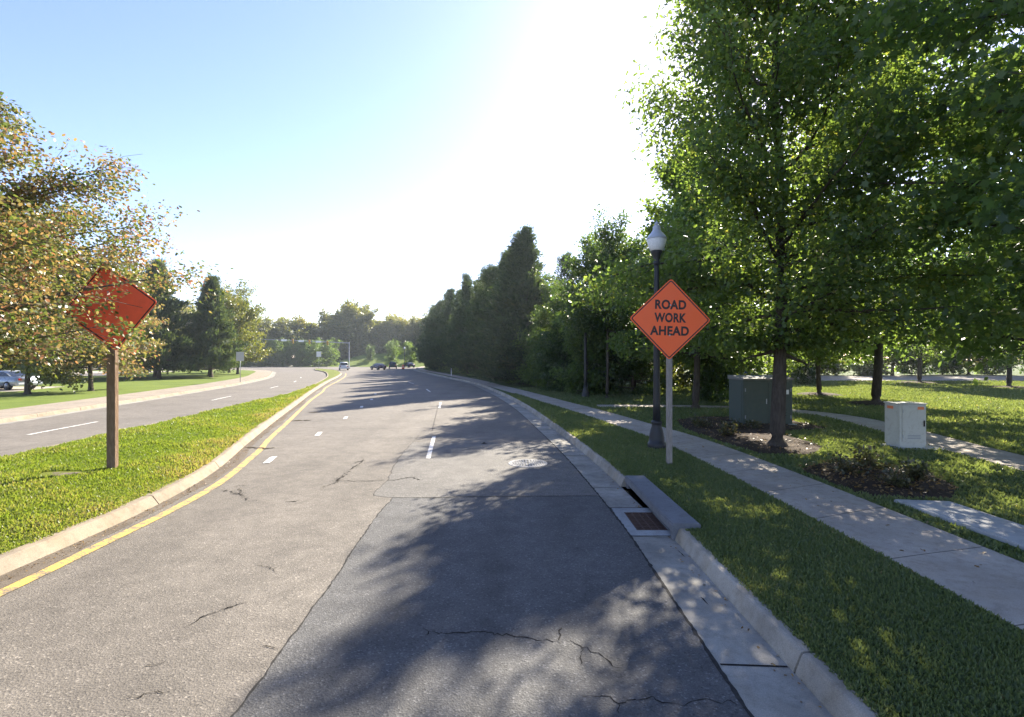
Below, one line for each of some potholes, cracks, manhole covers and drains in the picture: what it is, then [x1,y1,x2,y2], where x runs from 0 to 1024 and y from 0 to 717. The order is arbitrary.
drain grate [611,475,701,540]
crack [327,459,423,486]
crack [579,694,741,712]
crack [423,627,619,668]
manhole cover [508,459,548,467]
